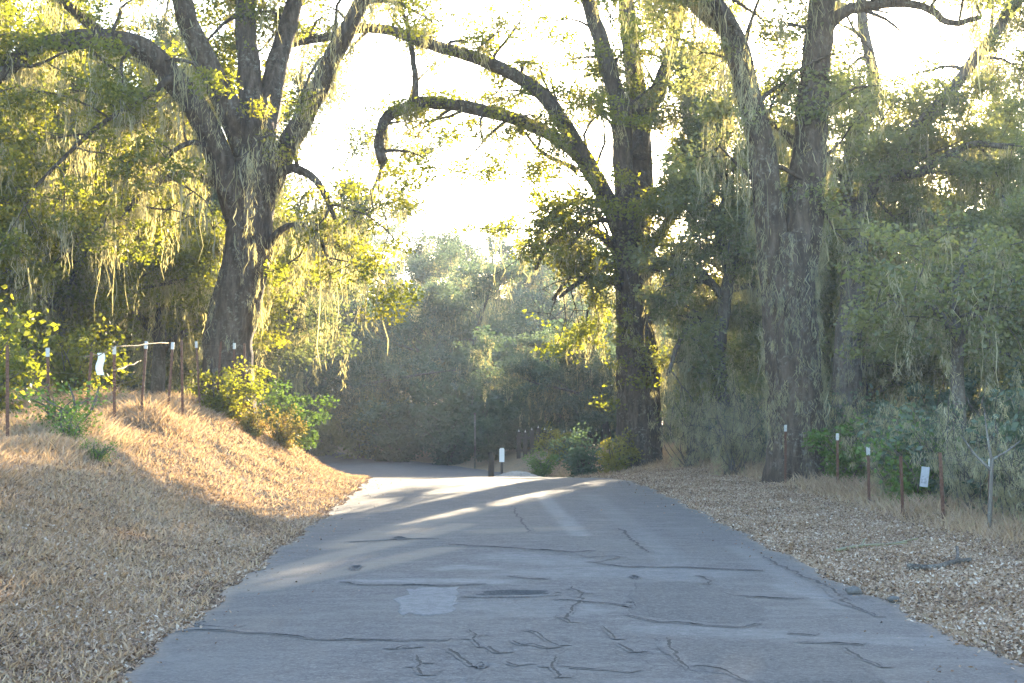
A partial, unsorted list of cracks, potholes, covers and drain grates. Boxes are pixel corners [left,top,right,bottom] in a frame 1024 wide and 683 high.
crack [175,506,894,681]
pothole [463,589,562,597]
